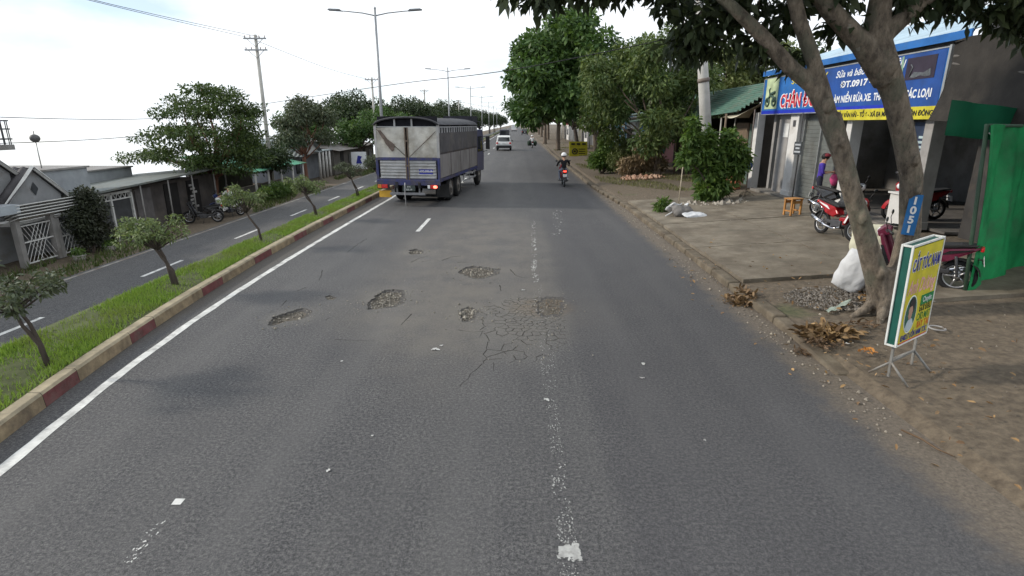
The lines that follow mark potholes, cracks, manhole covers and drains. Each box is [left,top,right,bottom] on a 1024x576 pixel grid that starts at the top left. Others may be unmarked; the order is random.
pothole [458,266,501,279]
pothole [268,308,313,326]
pothole [536,296,565,318]
pothole [458,306,477,322]
crack [460,269,566,387]
pothole [367,289,407,310]
